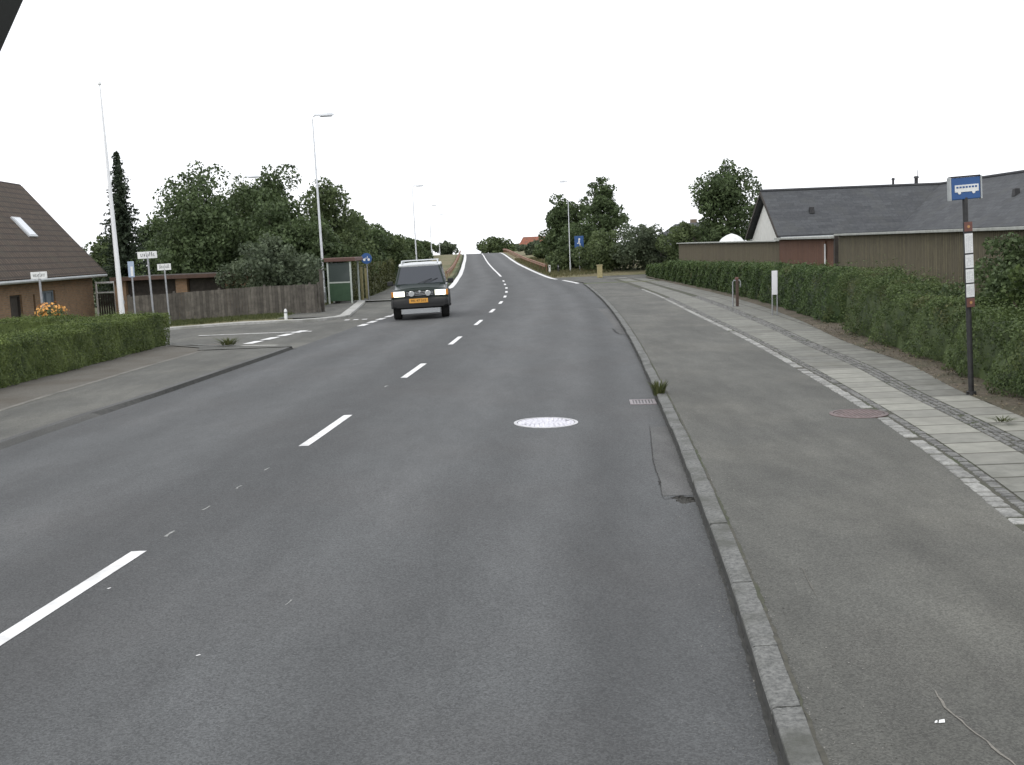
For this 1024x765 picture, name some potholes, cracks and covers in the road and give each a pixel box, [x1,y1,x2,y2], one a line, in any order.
crack [649,426,669,499]
manhole cover [514,417,578,428]
pothole [671,495,695,504]
crack [935,690,1016,765]
manhole cover [829,409,889,418]
